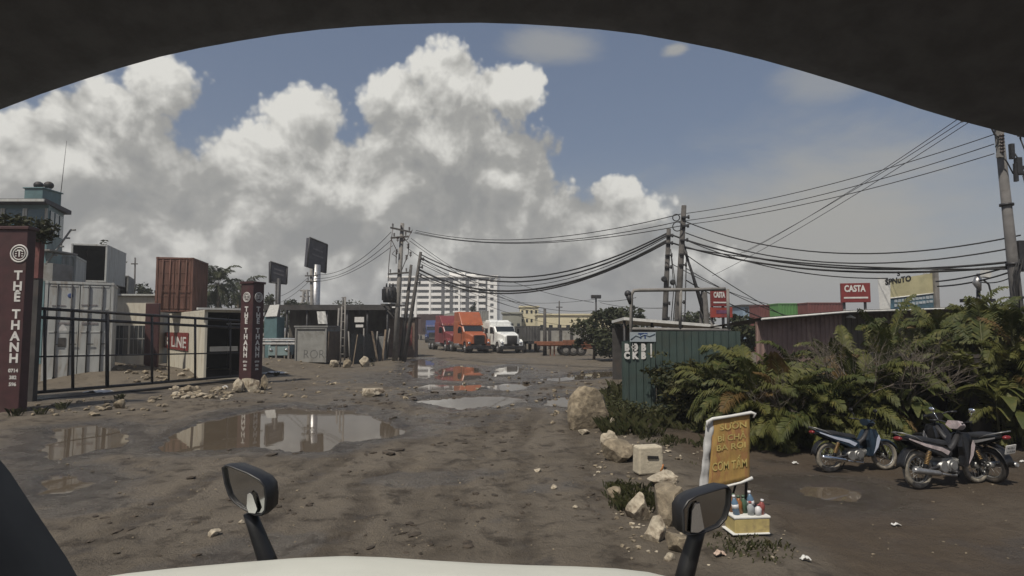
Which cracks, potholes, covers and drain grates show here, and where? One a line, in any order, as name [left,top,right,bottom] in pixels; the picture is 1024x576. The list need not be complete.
pothole [778,477,883,504]
pothole [532,394,571,407]
pothole [523,369,613,381]
pothole [398,357,443,380]
pothole [480,382,540,391]
pothole [143,403,417,453]
pothole [428,364,490,381]
pothole [397,382,486,392]
pothole [410,393,535,410]
pothole [17,422,147,463]
pothole [22,468,113,497]
pothole [485,364,530,377]
